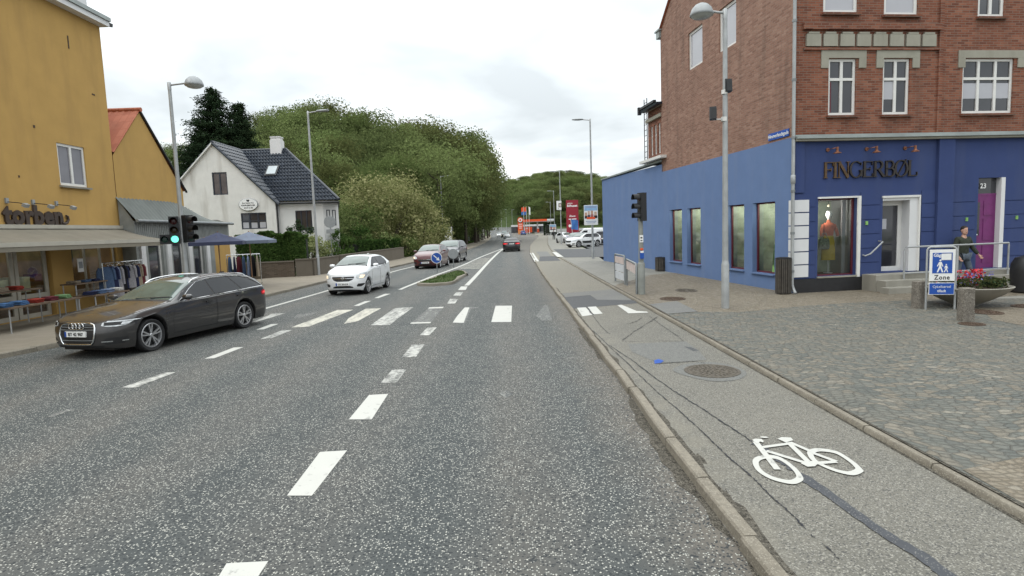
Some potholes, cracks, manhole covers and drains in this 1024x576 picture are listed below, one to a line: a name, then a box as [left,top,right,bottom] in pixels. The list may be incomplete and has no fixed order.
manhole cover [673,362,747,381]
